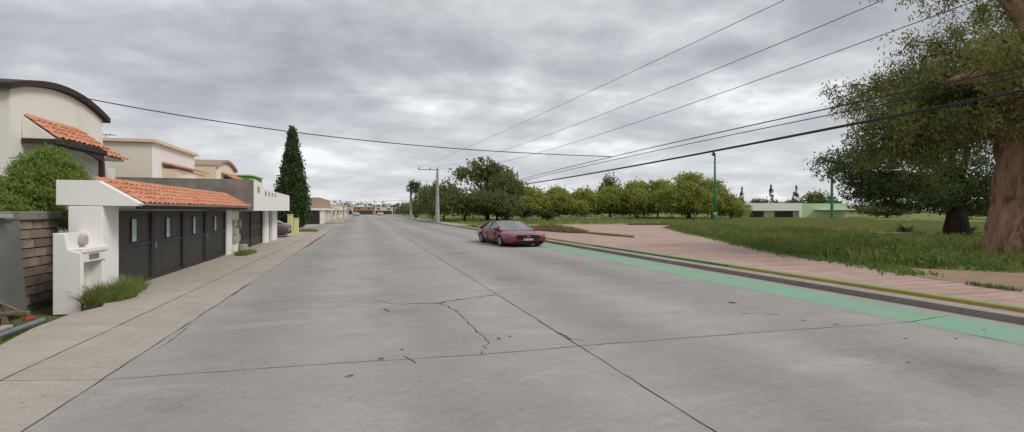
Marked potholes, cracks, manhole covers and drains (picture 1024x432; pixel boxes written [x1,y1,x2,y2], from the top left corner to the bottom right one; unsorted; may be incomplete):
crack [335,295,493,354]
